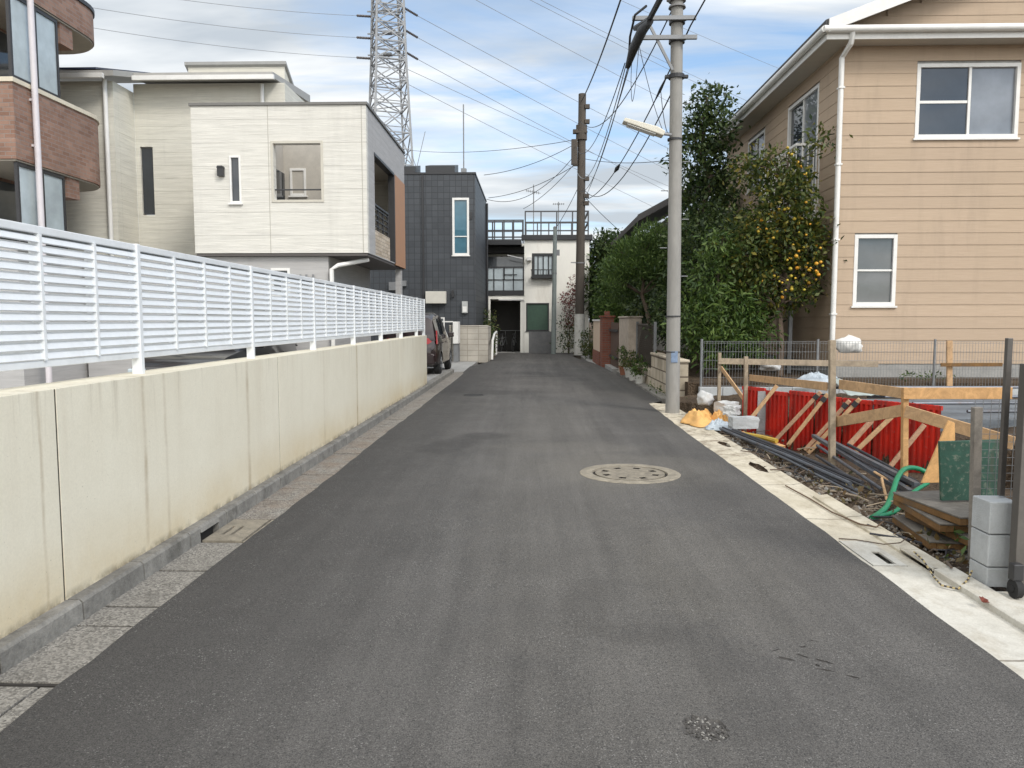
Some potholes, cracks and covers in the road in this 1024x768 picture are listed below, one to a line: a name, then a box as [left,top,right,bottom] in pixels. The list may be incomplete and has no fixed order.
manhole cover [580,464,681,484]
pothole [679,714,730,743]
